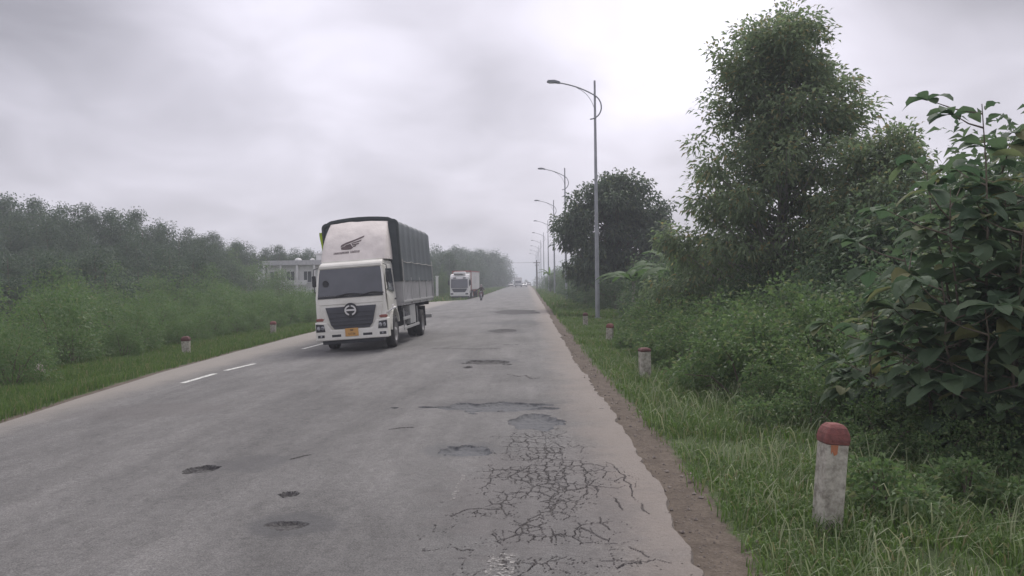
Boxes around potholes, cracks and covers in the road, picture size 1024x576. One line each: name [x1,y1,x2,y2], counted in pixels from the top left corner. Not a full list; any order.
pothole [264,521,309,531]
pothole [507,413,566,432]
crack [411,429,667,575]
pothole [438,445,493,456]
pothole [391,401,559,414]
pothole [182,465,222,474]
